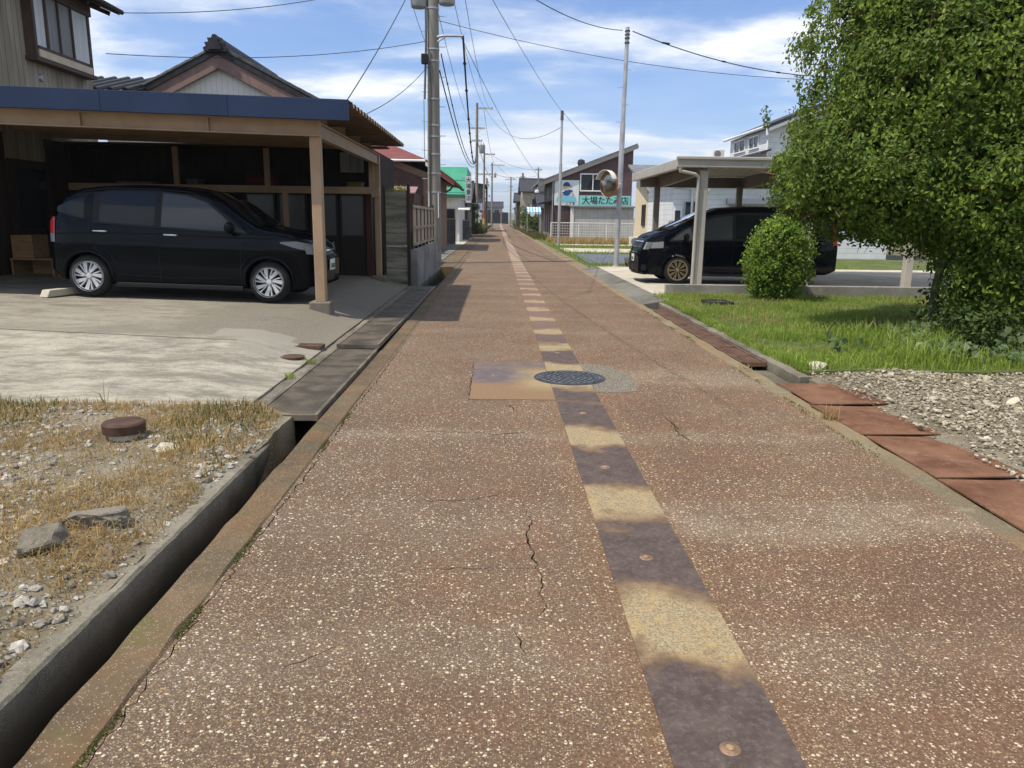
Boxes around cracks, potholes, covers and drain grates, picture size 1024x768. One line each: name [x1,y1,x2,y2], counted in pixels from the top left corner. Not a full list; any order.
crack [418,492,547,615]
manhole cover [534,370,605,385]
drain grate [266,348,378,421]
drain grate [336,307,415,349]
